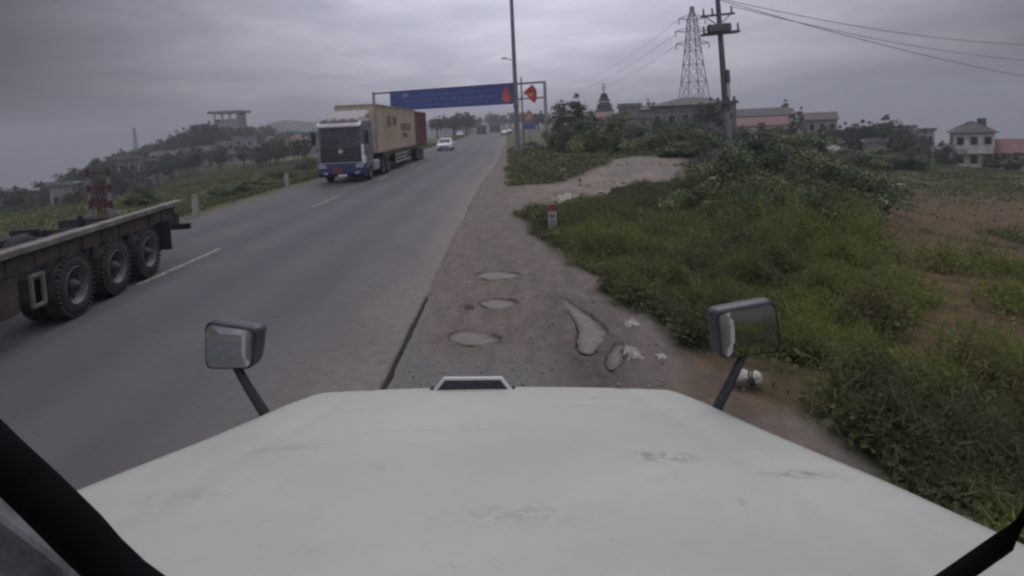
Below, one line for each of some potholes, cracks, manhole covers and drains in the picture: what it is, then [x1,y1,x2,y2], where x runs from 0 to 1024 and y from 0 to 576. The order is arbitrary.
pothole [470,295,527,313]
pothole [468,270,529,283]
pothole [437,327,513,352]
pothole [592,338,638,379]
pothole [549,293,620,361]
